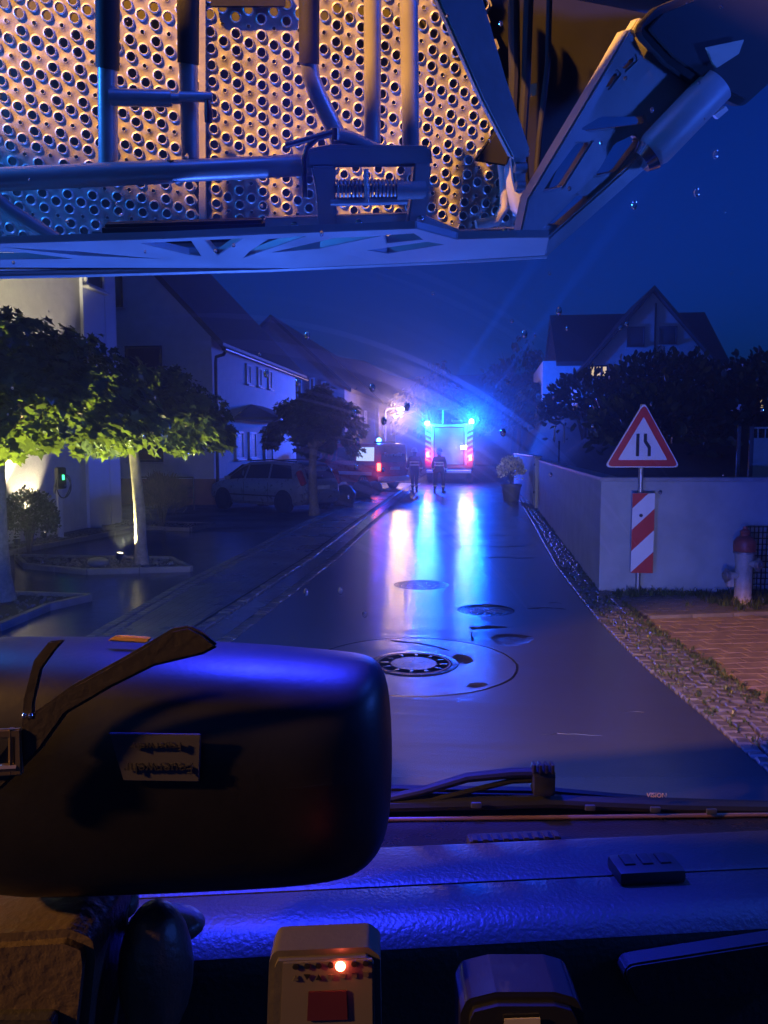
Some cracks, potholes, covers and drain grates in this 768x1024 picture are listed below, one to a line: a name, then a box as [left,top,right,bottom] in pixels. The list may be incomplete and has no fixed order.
manhole cover [457,605,514,616]
pothole [490,634,535,646]
pothole [452,654,473,665]
manhole cover [394,580,449,590]
